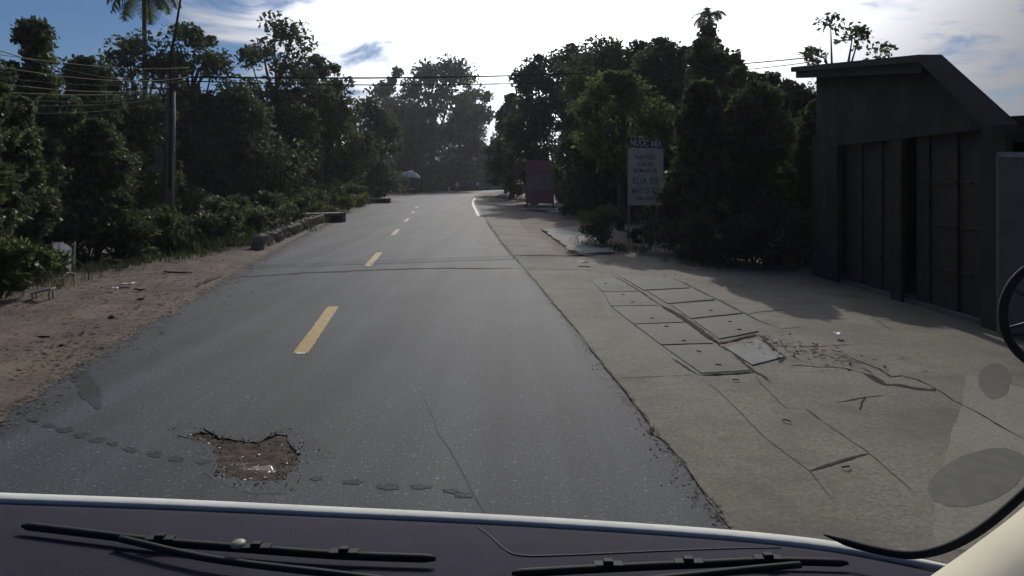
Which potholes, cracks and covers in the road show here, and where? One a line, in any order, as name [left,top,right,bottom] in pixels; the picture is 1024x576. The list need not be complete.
pothole [166,422,336,494]
crack [197,220,725,518]
